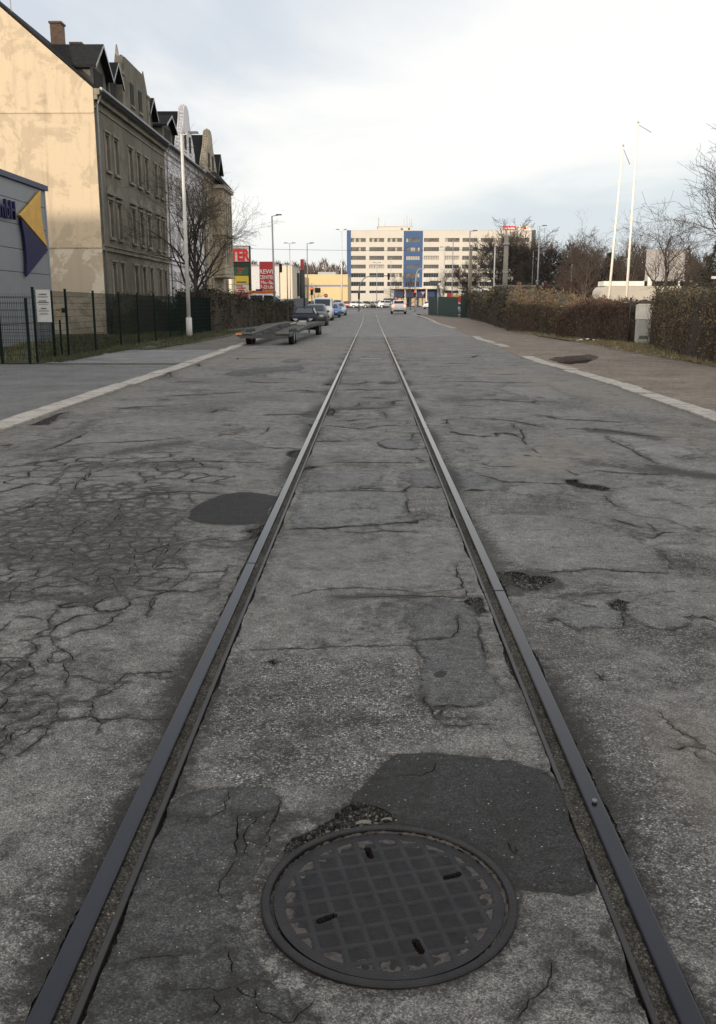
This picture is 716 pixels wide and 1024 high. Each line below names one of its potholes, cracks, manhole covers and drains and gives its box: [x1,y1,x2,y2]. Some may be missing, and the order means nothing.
crack [318,382,426,463]
manhole cover [261,825,518,990]
crack [266,618,486,658]
pothole [609,599,629,612]
pothole [497,572,557,591]
crack [0,358,314,760]
crack [127,949,315,1023]
crack [293,485,467,598]
crack [421,694,488,727]
crack [658,711,715,759]
crack [187,791,282,899]
pothole [565,479,610,491]
